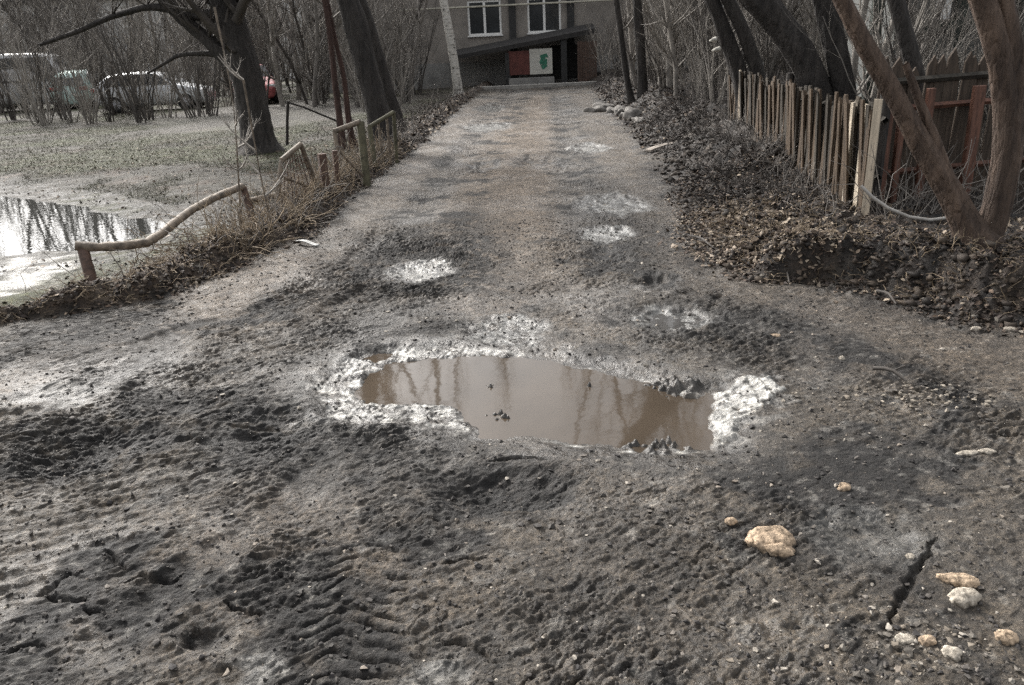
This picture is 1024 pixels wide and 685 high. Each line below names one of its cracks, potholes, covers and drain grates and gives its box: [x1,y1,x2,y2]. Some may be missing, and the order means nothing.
pothole [389,258,454,283]
pothole [632,306,710,332]
pothole [346,342,390,359]
pothole [307,345,794,457]
